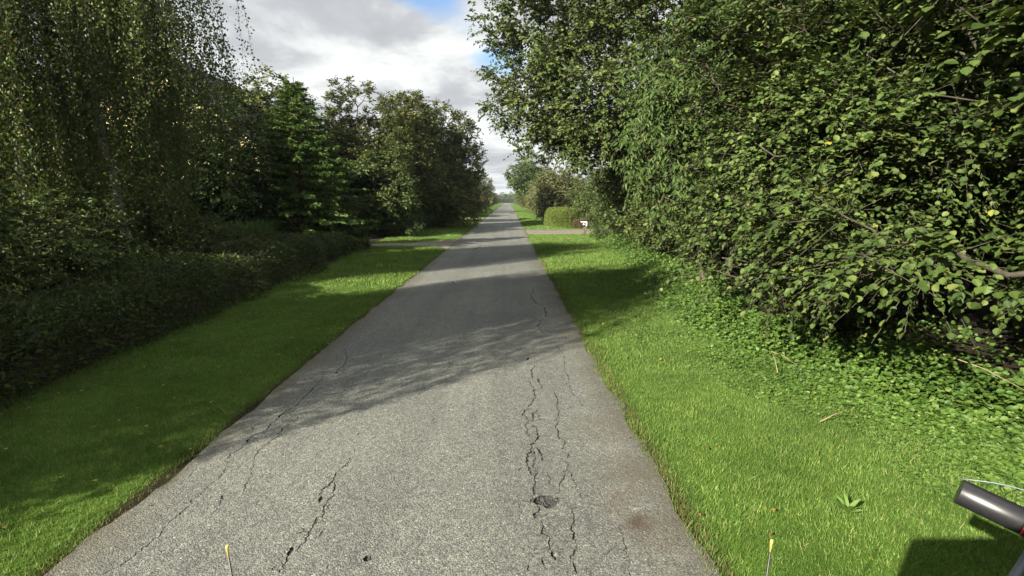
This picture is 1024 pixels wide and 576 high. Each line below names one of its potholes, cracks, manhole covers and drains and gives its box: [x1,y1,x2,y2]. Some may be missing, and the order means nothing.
pothole [533,495,560,509]
crack [272,429,368,573]
crack [104,349,347,574]
crack [516,287,584,573]
